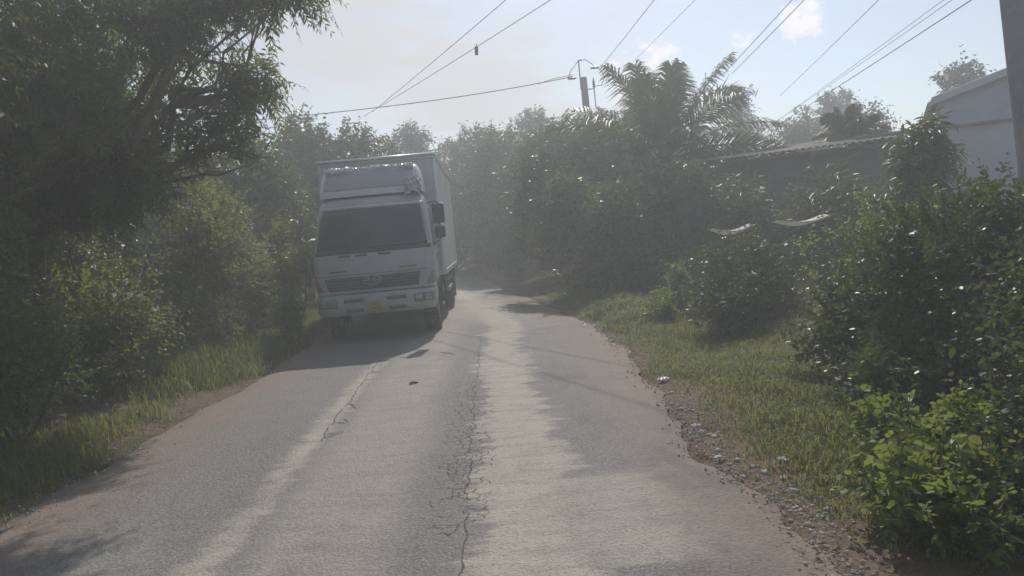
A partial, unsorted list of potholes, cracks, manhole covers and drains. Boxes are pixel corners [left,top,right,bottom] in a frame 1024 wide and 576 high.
crack [426,337,496,576]
crack [321,360,387,441]
